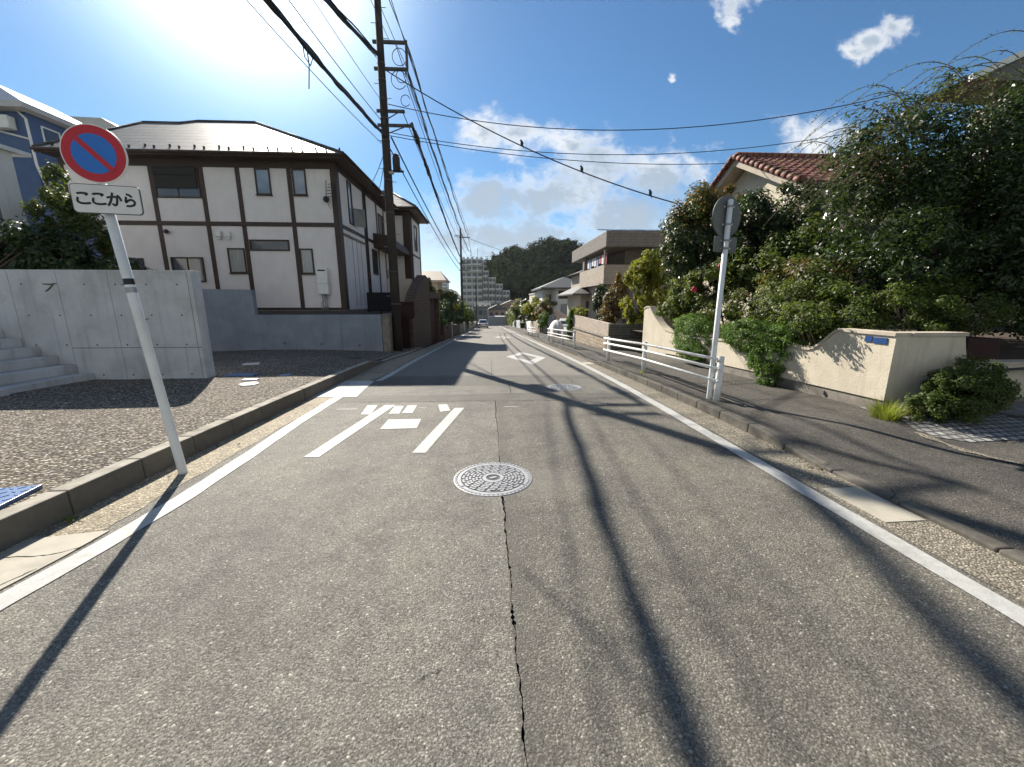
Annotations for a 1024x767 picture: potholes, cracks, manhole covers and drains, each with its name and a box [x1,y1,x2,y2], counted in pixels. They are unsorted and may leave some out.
crack [495,385,528,767]
manhole cover [454,462,532,497]
